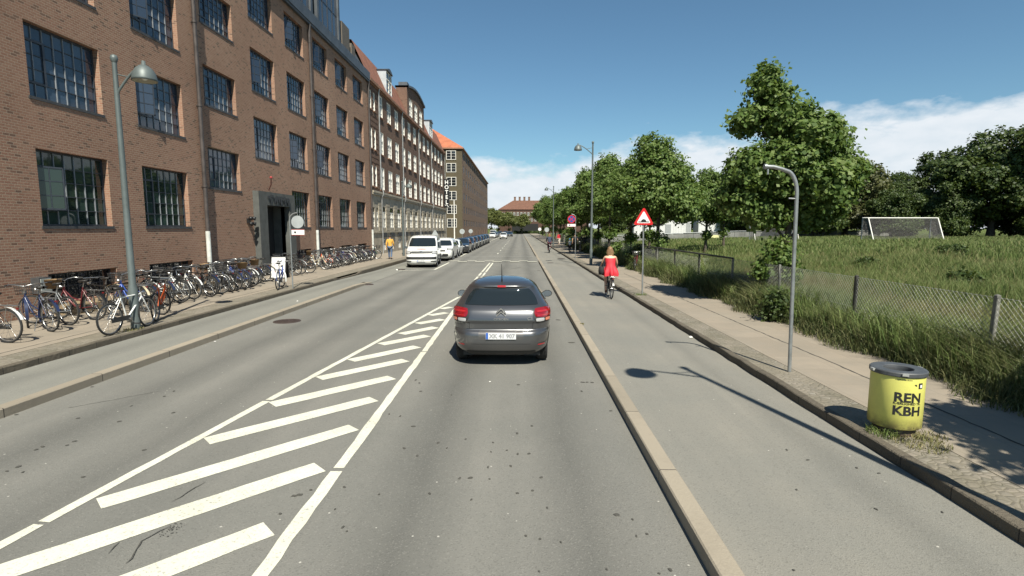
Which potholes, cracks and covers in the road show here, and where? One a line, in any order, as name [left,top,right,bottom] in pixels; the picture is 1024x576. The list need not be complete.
crack [110,527,167,564]
